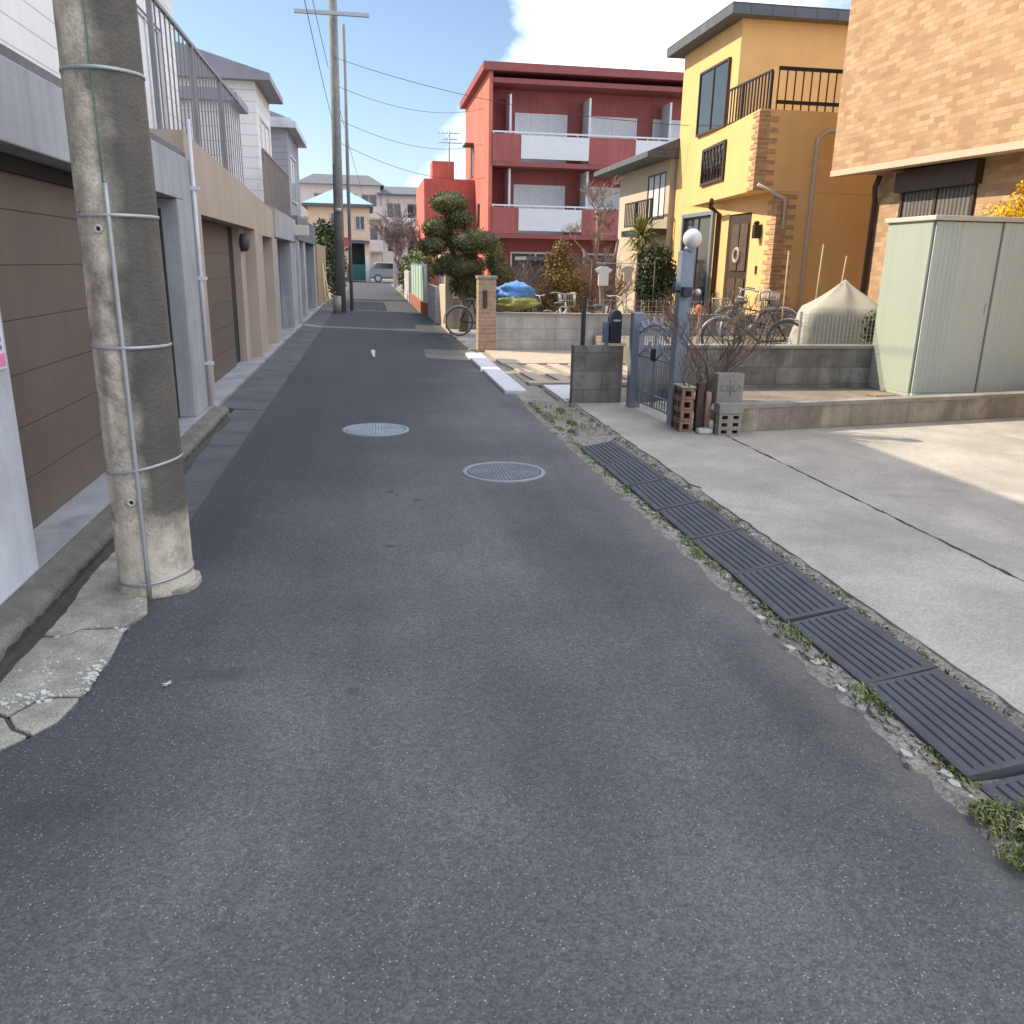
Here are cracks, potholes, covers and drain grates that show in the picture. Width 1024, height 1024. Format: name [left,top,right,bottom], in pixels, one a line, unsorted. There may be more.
manhole cover [462,462,546,483]
manhole cover [342,423,409,437]
crack [0,697,82,738]
